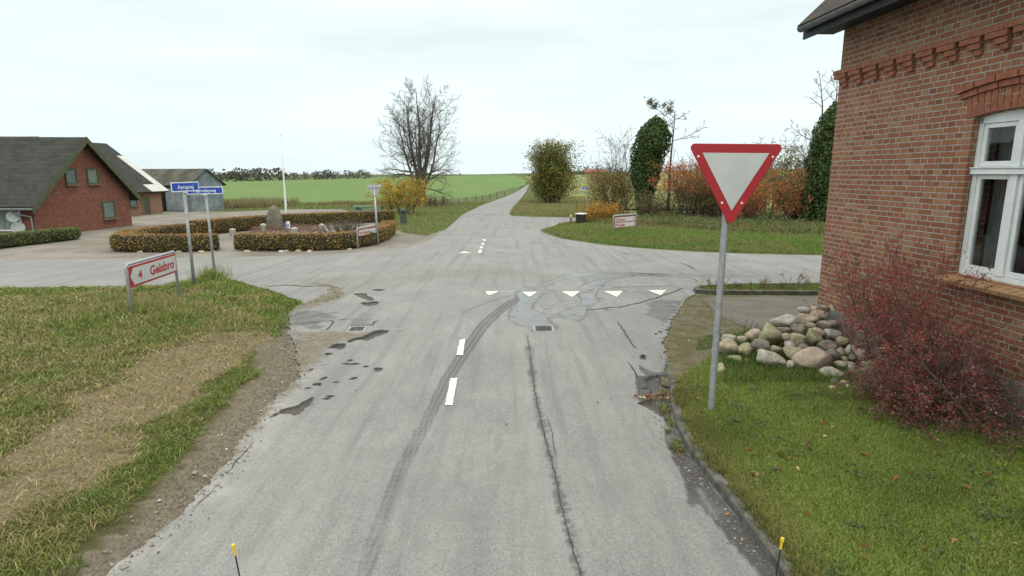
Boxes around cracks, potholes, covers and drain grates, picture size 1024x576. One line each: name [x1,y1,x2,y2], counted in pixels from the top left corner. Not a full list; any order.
pothole [270,397,314,418]
crack [527,336,581,575]
pothole [347,330,389,342]
crack [194,441,254,508]
crack [590,288,683,348]
pothole [637,374,672,417]
